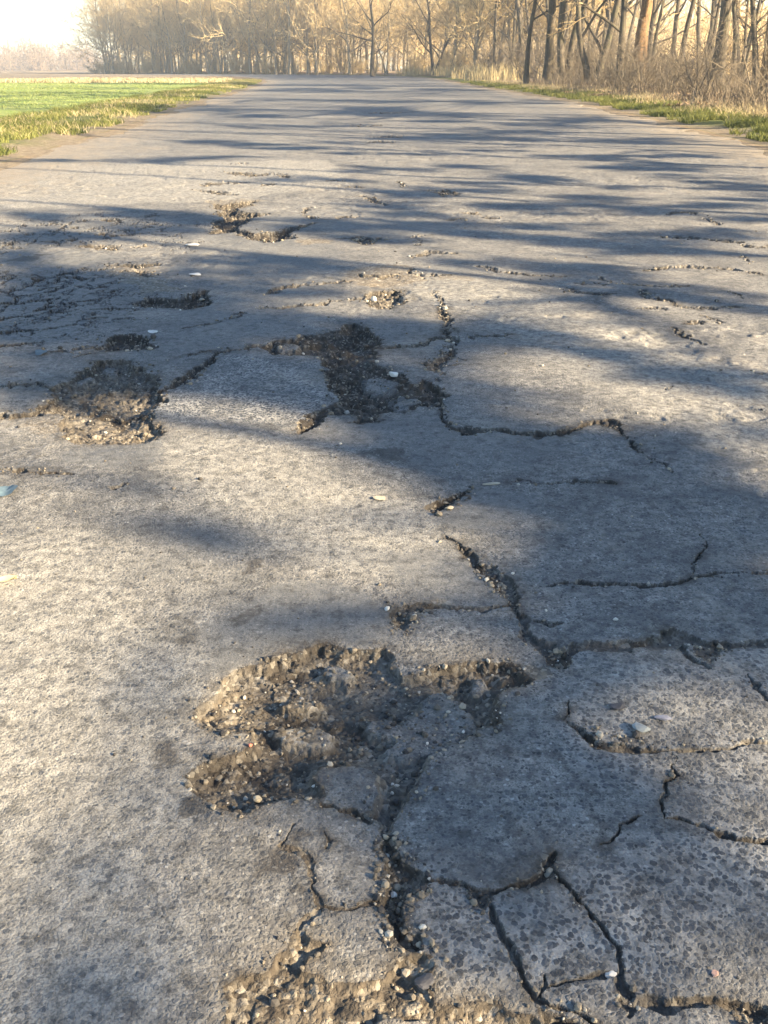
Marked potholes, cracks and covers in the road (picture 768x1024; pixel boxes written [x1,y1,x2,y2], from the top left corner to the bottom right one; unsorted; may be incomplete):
pothole [127,290,215,310]
crack [659,210,768,262]
pothole [47,333,157,359]
pothole [209,200,319,243]
crack [163,343,266,391]
pothole [259,323,452,434]
pothole [348,291,409,310]
crack [389,533,768,670]
crack [438,407,673,485]
crack [374,674,768,1024]
crack [181,179,745,383]
